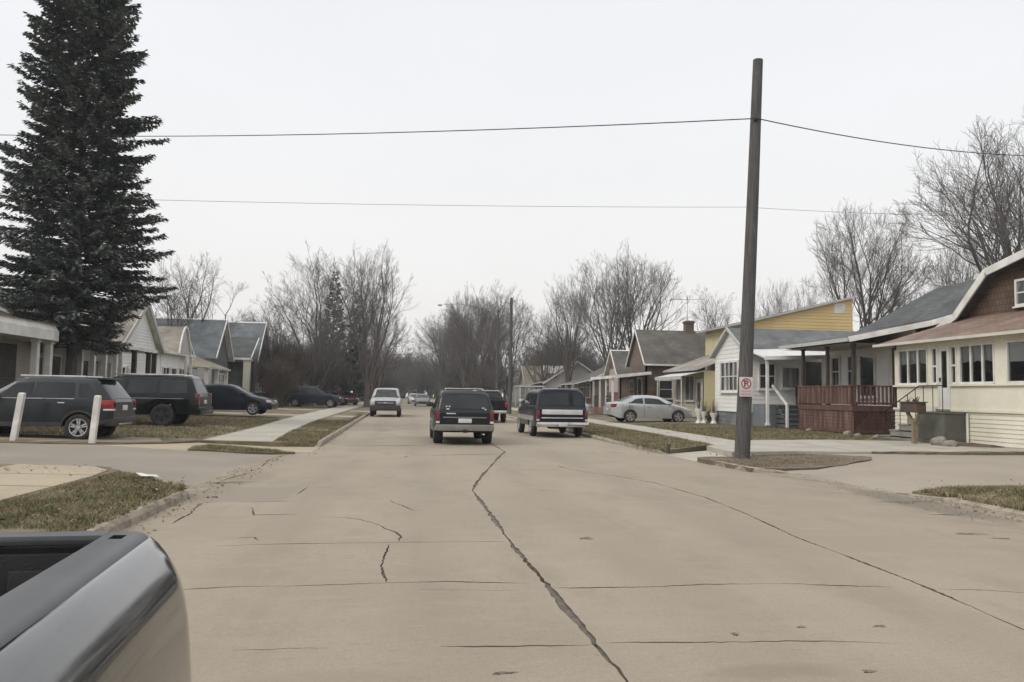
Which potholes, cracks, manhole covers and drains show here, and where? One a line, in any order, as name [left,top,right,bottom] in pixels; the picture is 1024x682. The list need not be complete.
crack [183,443,1024,682]
